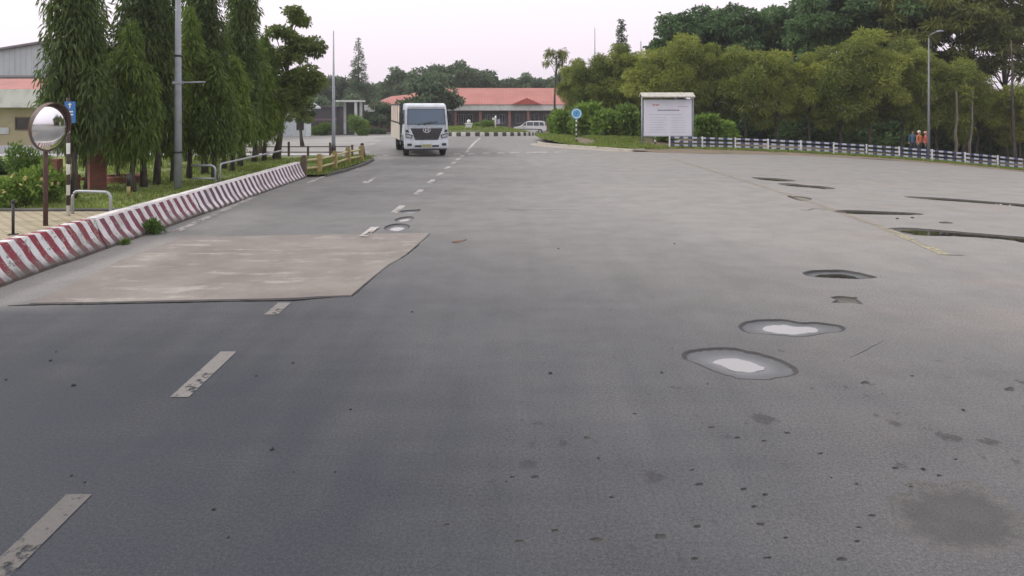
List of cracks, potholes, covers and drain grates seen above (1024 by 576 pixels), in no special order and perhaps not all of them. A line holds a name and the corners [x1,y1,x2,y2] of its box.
pothole [681,347,799,380]
pothole [887,227,1024,243]
pothole [904,196,1024,207]
pothole [738,319,846,337]
pothole [831,296,863,304]
pothole [802,269,877,279]
